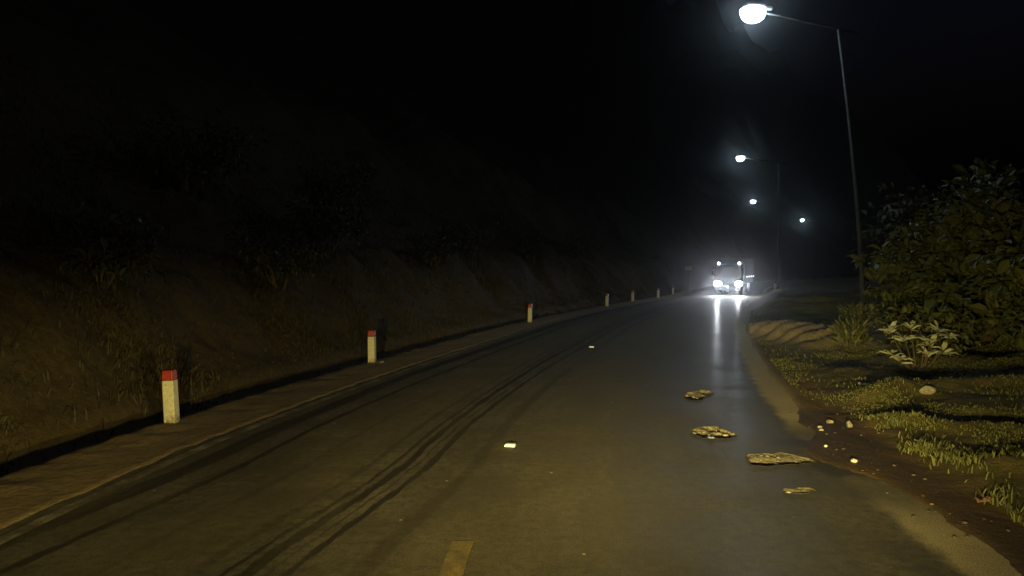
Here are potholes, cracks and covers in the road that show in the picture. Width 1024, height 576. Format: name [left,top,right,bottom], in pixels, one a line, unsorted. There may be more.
pothole [745,452,816,467]
pothole [683,390,714,401]
pothole [690,426,738,439]
